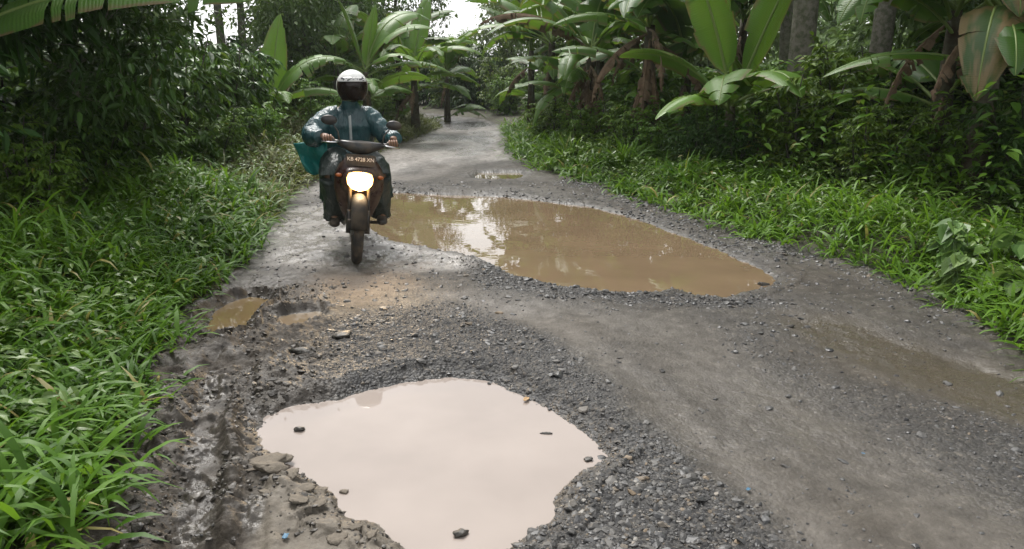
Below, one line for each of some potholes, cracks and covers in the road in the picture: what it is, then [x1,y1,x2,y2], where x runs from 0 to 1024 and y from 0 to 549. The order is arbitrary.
pothole [270,299,334,325]
pothole [467,169,530,179]
pothole [192,286,277,332]
pothole [321,186,800,299]
pothole [225,356,636,549]
